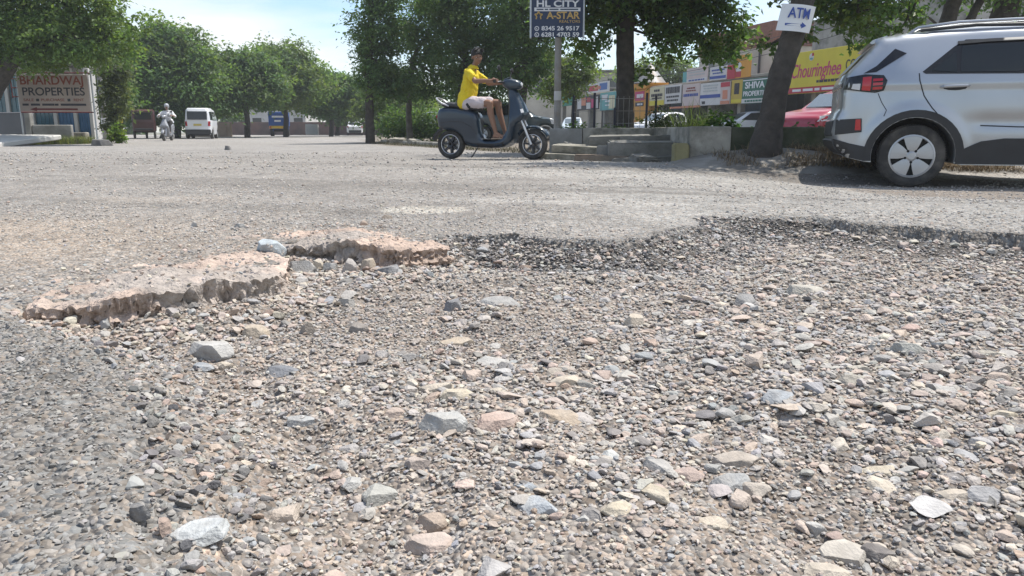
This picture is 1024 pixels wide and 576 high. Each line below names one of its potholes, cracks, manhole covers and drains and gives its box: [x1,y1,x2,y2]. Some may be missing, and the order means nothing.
pothole [10,216,1024,576]
